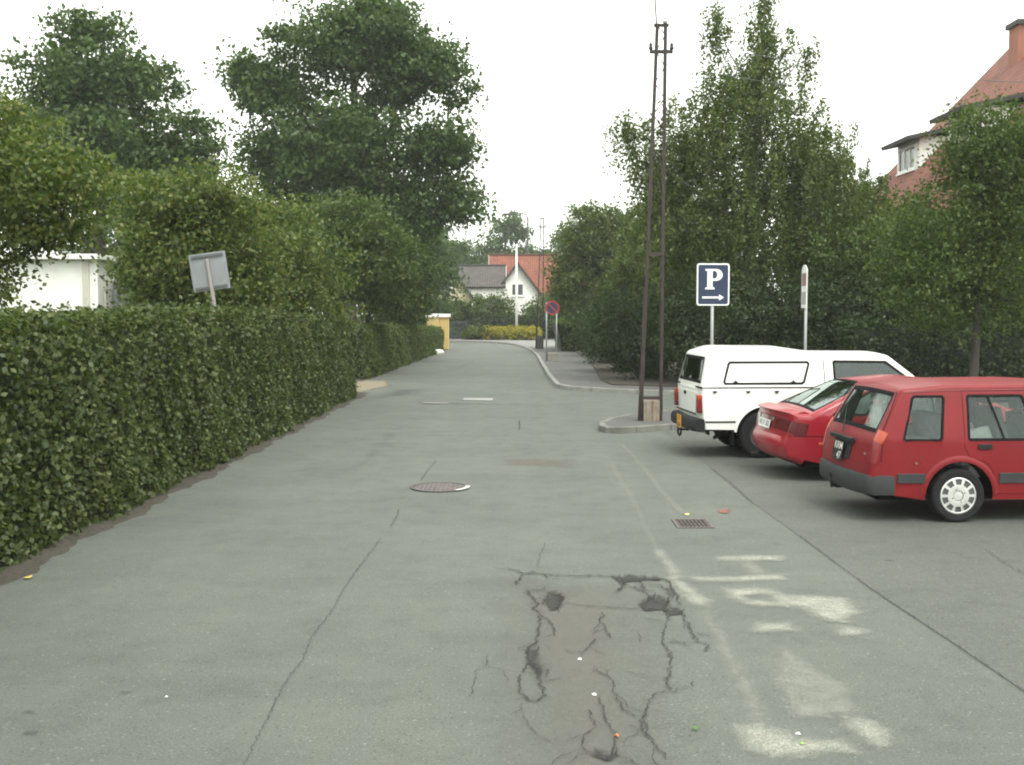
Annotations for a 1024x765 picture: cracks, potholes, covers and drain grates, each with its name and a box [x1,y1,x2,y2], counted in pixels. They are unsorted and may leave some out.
pothole [641,595,669,612]
crack [468,542,710,765]
pothole [545,591,564,611]
manhole cover [410,482,470,493]
drain grate [671,519,715,528]
